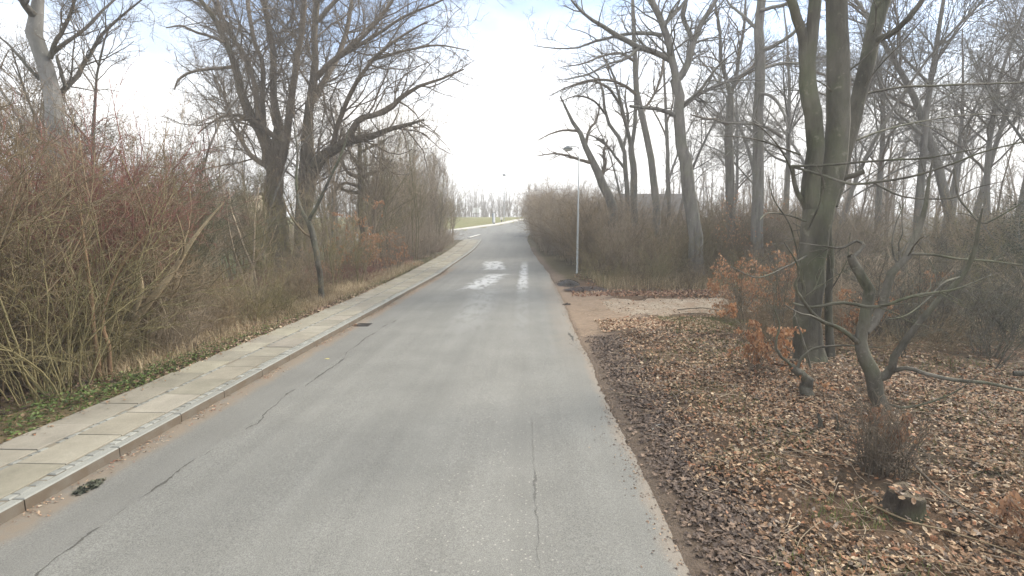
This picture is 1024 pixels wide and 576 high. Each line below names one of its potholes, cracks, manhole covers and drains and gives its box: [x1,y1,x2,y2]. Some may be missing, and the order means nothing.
crack [531,423,540,563]
crack [35,321,395,576]
